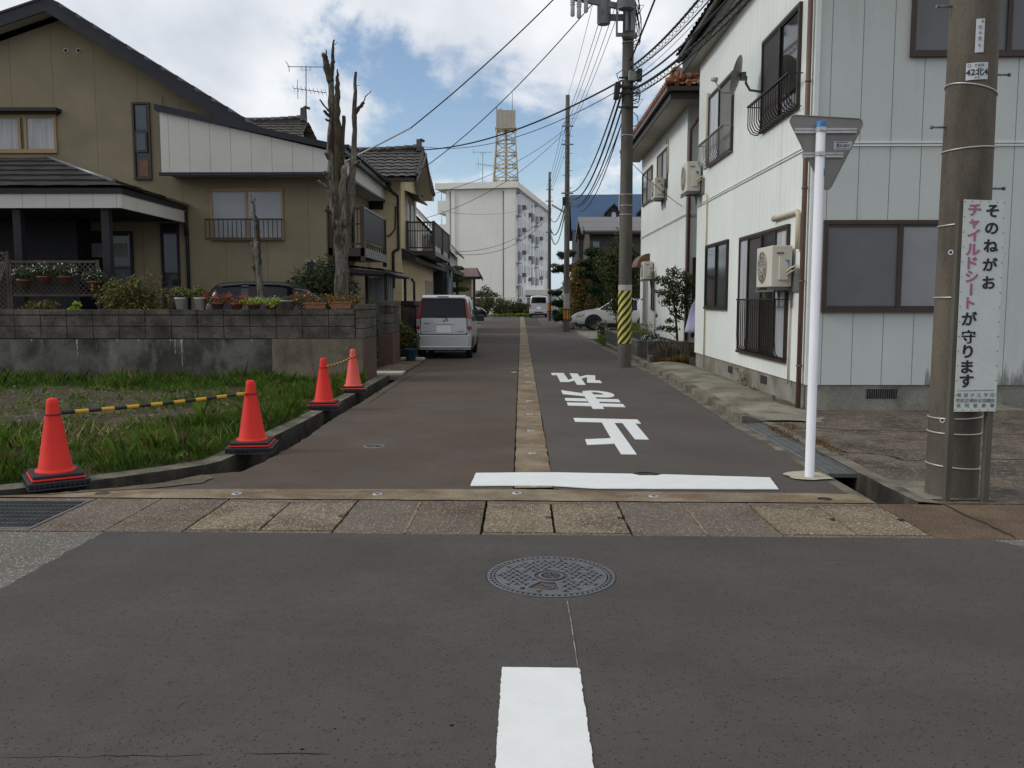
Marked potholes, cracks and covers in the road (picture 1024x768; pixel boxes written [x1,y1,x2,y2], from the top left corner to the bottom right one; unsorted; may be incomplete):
drain grate [741,423,857,478]
drain grate [0,500,91,529]
manhole cover [487,556,616,598]
